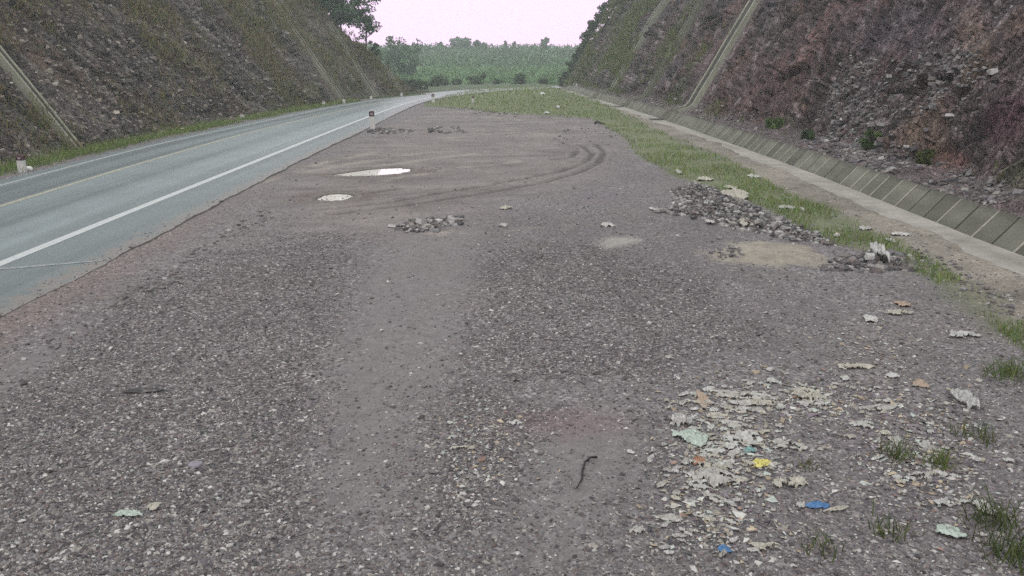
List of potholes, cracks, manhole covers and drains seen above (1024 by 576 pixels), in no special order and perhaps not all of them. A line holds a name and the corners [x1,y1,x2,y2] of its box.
pothole [324,167,419,177]
